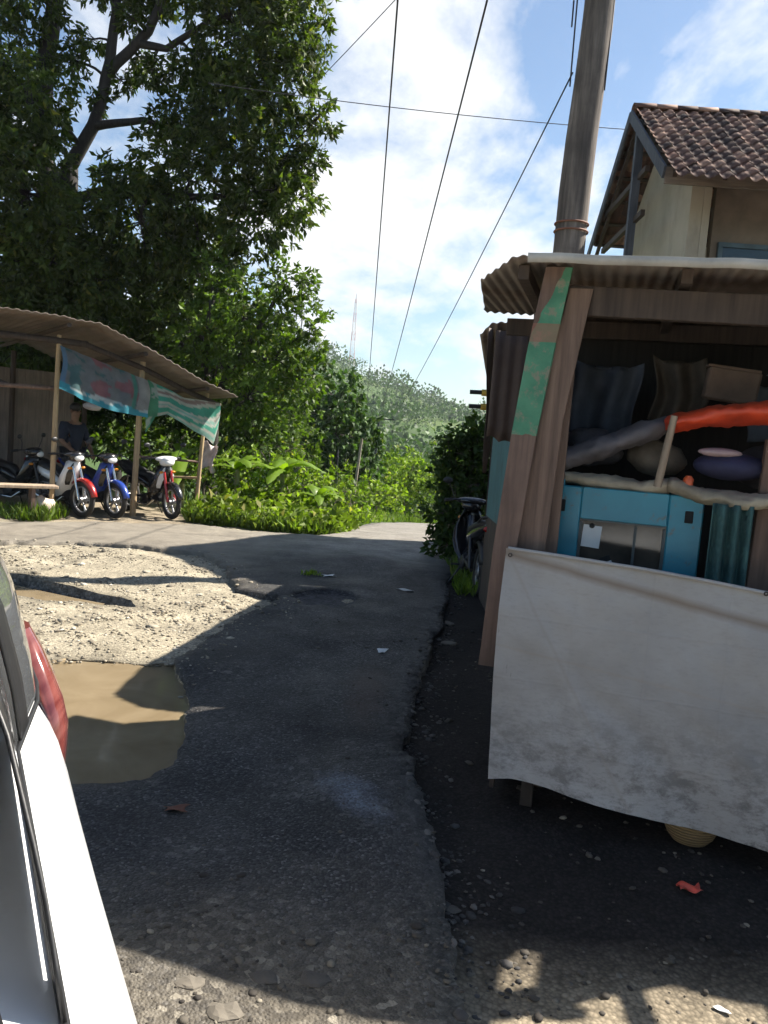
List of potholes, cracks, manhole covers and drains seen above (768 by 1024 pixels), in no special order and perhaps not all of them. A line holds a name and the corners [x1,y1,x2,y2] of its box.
pothole [50,658,190,784]
pothole [291,590,357,608]
